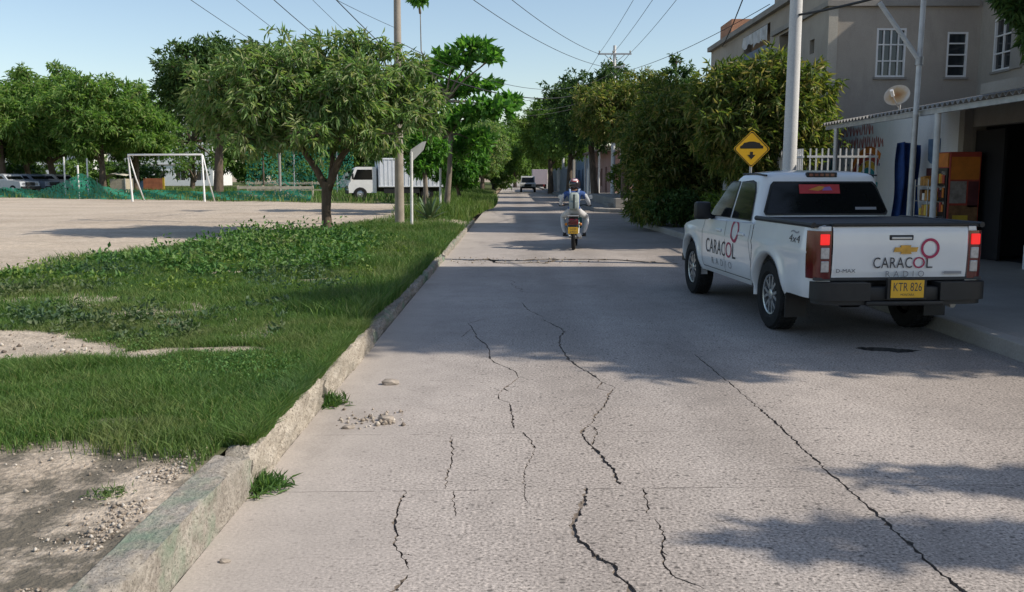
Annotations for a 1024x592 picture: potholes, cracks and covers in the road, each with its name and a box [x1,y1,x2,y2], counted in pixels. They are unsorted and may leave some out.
crack [463,318,536,501]
crack [511,282,704,592]
crack [444,435,457,516]
crack [390,492,413,592]
crack [695,355,967,592]
